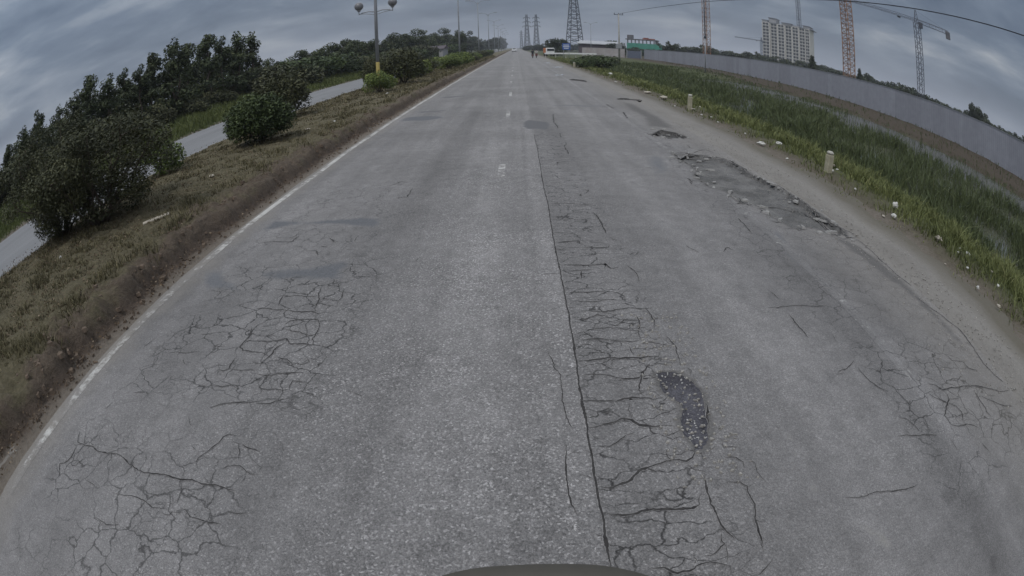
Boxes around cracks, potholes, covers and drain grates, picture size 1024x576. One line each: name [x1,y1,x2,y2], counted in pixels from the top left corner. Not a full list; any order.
crack [58,420,260,525]
pothole [648,369,719,454]
crack [723,185,1010,449]
pothole [649,130,688,139]
crack [535,114,572,165]
pothole [670,152,850,241]
crack [173,288,344,408]
crack [548,213,772,575]
